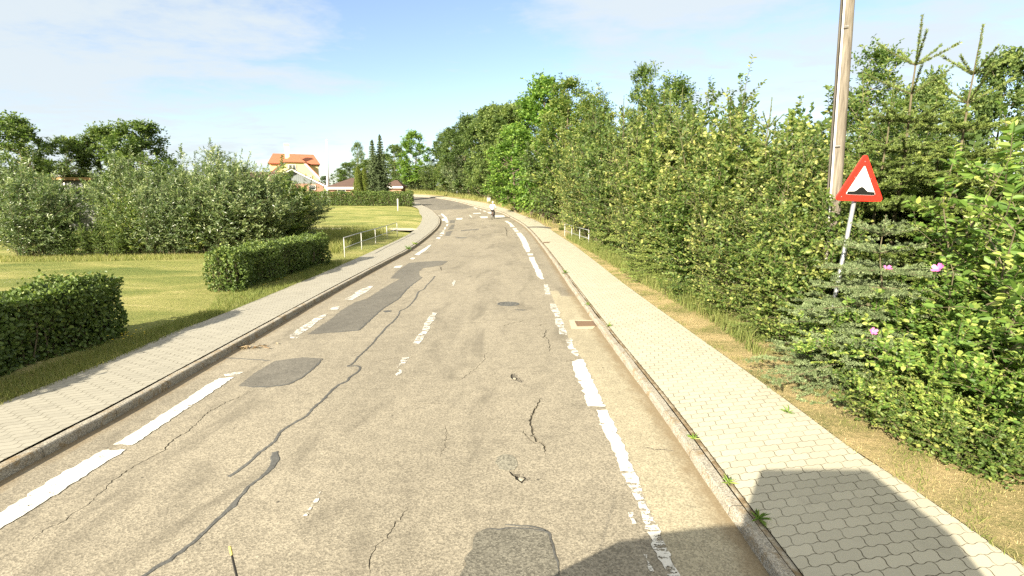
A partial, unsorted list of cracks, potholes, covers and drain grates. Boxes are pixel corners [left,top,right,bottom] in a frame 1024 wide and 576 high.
crack [369,509,408,572]
crack [523,399,547,457]
drain grate [569,320,596,329]
crack [23,390,249,546]
